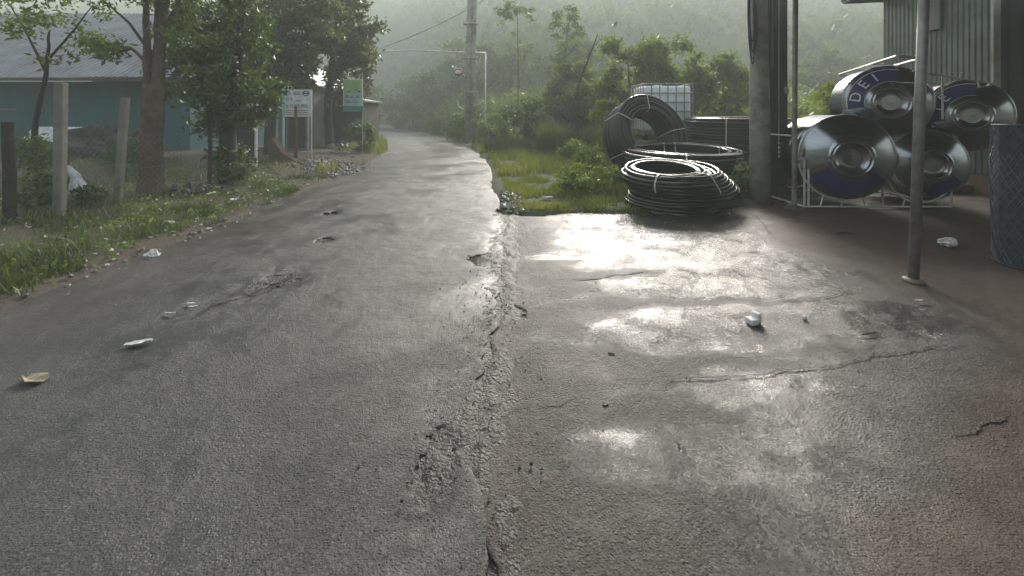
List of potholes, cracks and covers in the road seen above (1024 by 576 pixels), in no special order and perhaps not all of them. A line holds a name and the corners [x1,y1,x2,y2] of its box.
crack [951,412,1009,436]
pothole [244,273,301,295]
crack [659,345,964,384]
